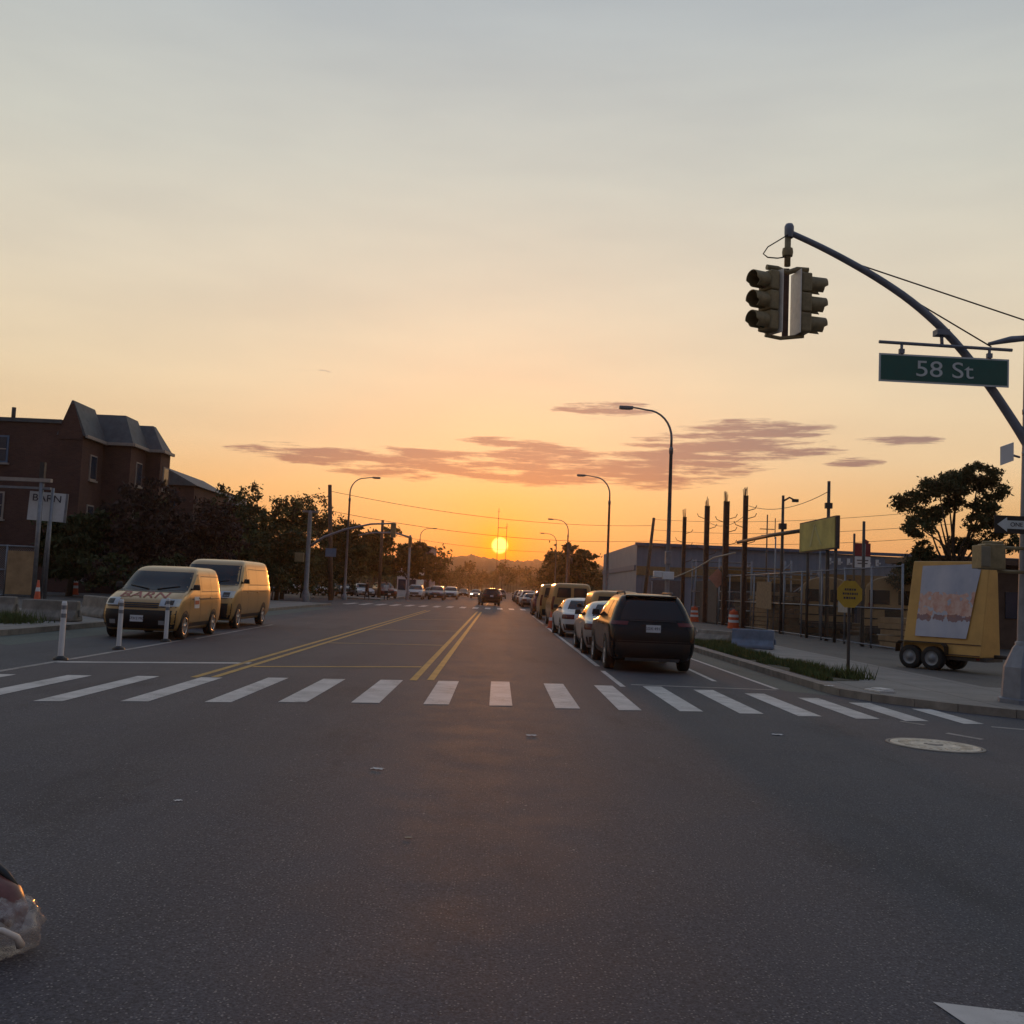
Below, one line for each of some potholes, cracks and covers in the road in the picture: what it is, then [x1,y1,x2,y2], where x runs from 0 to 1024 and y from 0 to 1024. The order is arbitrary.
manhole cover [885,738,986,753]
